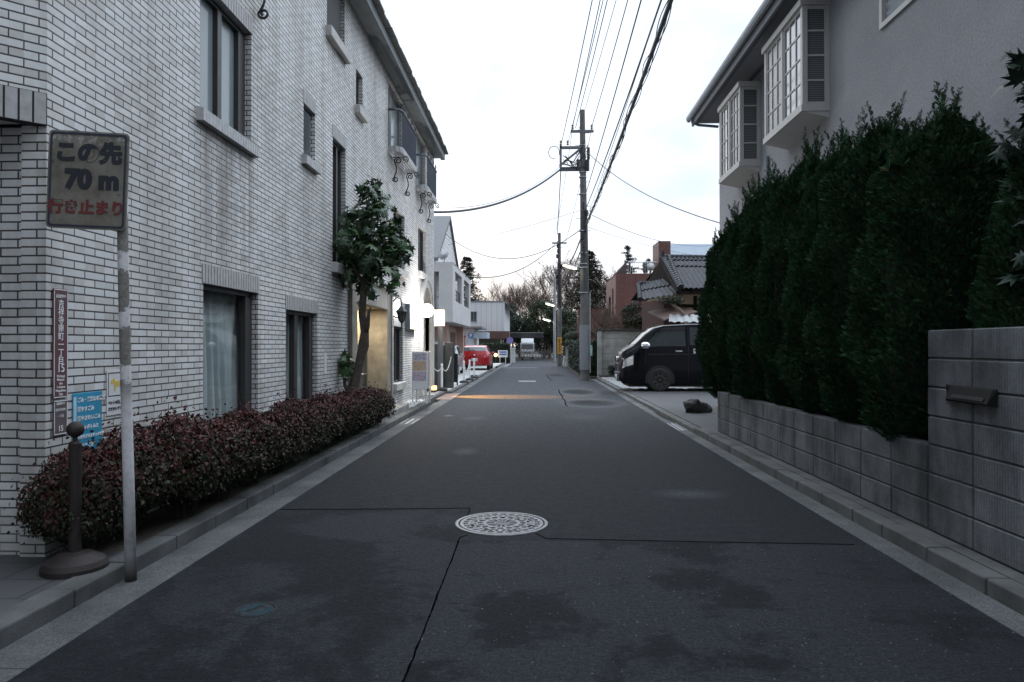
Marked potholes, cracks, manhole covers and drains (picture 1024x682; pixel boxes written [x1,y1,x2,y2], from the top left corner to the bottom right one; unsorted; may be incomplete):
manhole cover [455,512,548,536]
manhole cover [235,602,277,617]
crack [402,535,467,682]
